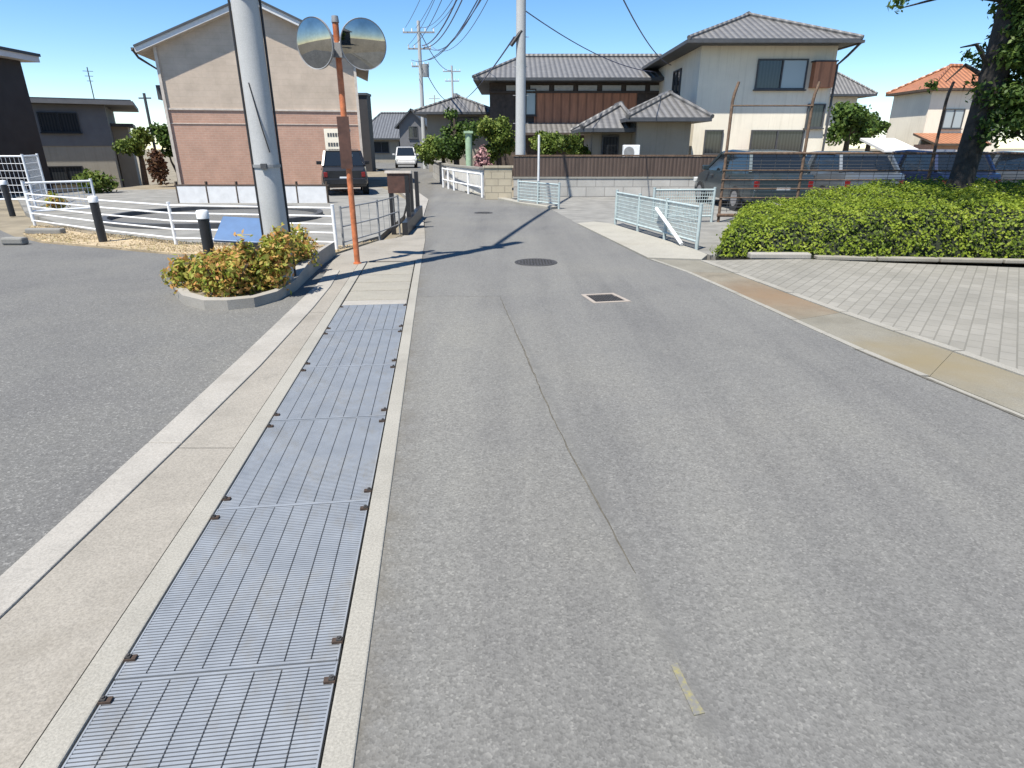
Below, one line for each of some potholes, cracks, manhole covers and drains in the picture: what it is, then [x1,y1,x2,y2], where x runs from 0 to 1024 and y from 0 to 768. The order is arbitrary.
drain grate [115,500,370,681]
crack [500,297,635,572]
drain grate [219,416,386,509]
drain grate [581,293,631,303]
drain grate [271,364,396,421]
drain grate [62,661,339,768]
manhole cover [515,258,557,266]
drain grate [326,303,407,332]
drain grate [304,329,402,368]
